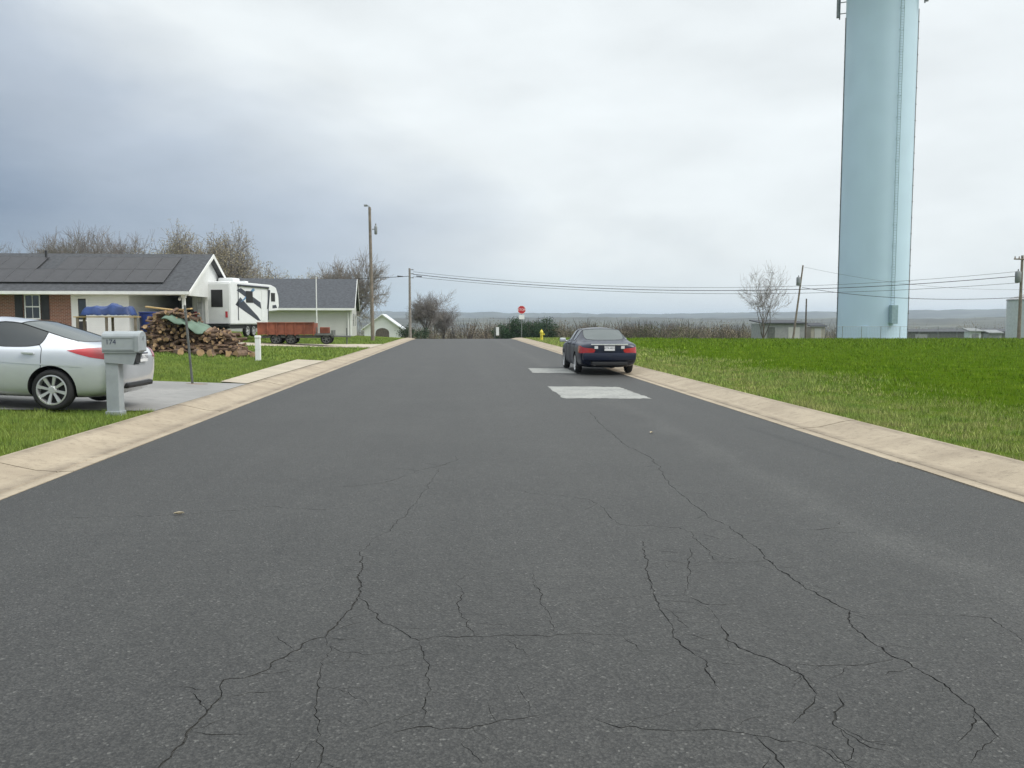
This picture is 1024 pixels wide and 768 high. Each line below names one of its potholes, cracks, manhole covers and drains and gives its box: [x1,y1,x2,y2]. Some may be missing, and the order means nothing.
crack [518,412,1023,768]
crack [158,469,640,768]
